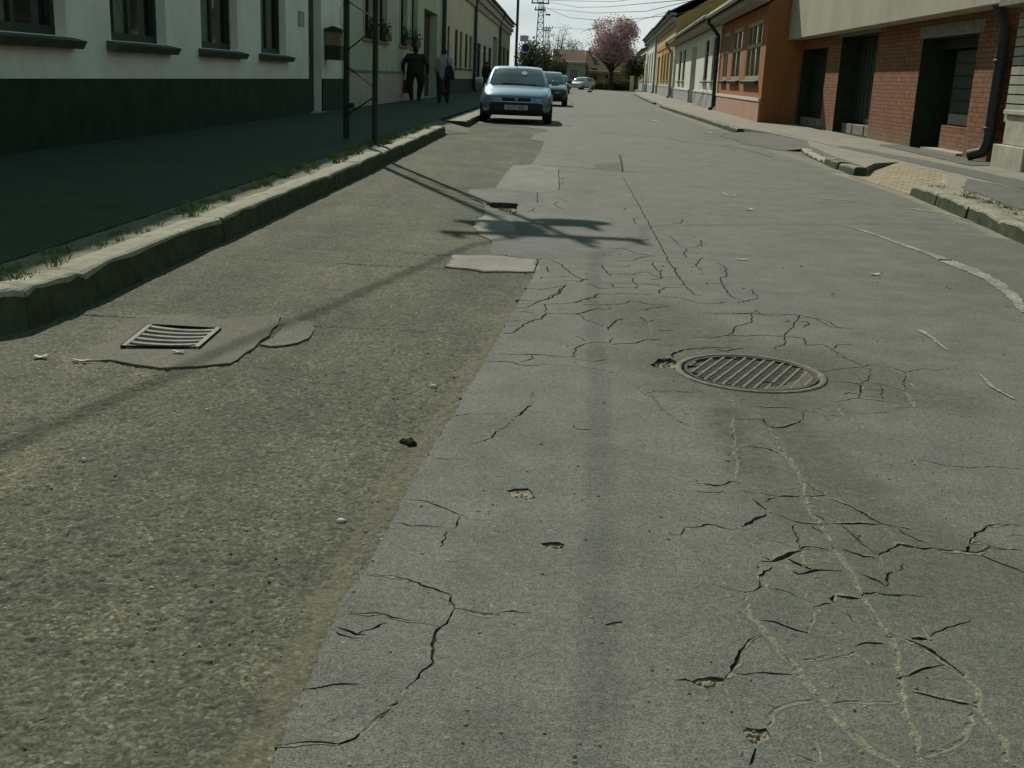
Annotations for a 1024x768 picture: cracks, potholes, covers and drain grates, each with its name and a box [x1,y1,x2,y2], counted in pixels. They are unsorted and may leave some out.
pothole [485,202,519,214]
pothole [691,677,725,689]
pothole [507,488,535,501]
drain grate [120,324,221,349]
pothole [743,727,770,745]
pothole [651,358,677,369]
crack [447,208,1024,768]
manhole cover [675,354,827,394]
pothole [540,542,564,551]
crack [275,574,529,751]
crack [401,499,469,547]
